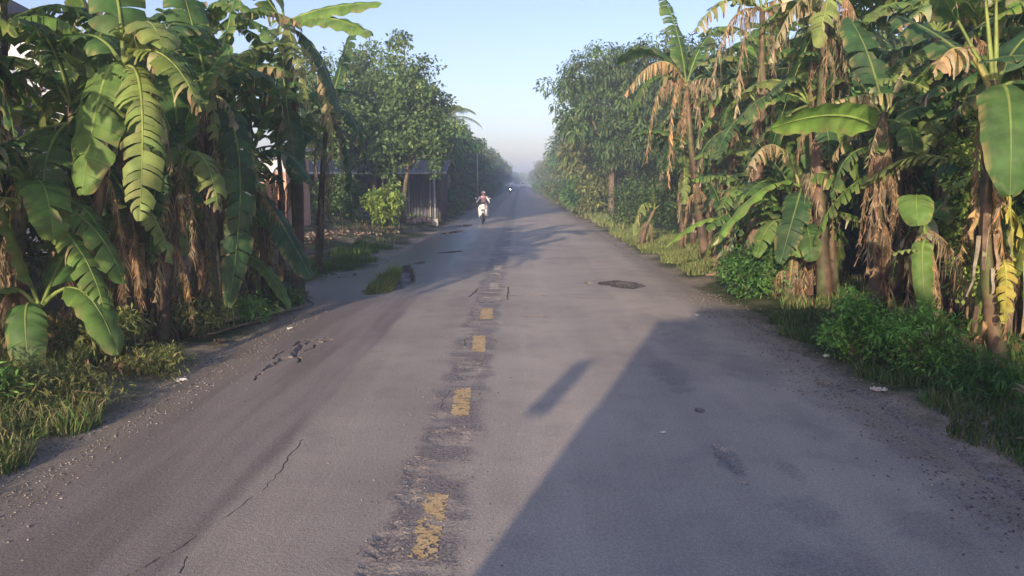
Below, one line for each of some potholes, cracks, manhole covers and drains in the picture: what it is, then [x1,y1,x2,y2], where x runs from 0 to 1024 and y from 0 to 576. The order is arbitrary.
crack [468,286,538,300]
pothole [395,456,433,506]
pothole [597,280,646,289]
pothole [354,520,411,576]
crack [124,535,198,576]
pothole [422,428,471,447]
